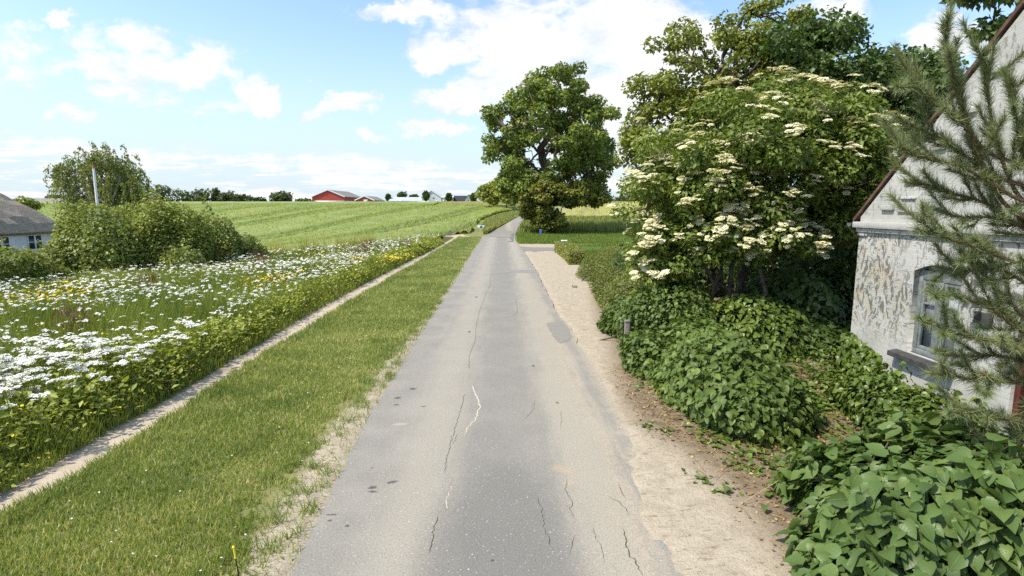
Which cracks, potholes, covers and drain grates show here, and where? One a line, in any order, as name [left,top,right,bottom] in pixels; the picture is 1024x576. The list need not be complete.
crack [428,386,481,554]
crack [538,482,575,551]
crack [593,485,671,576]
